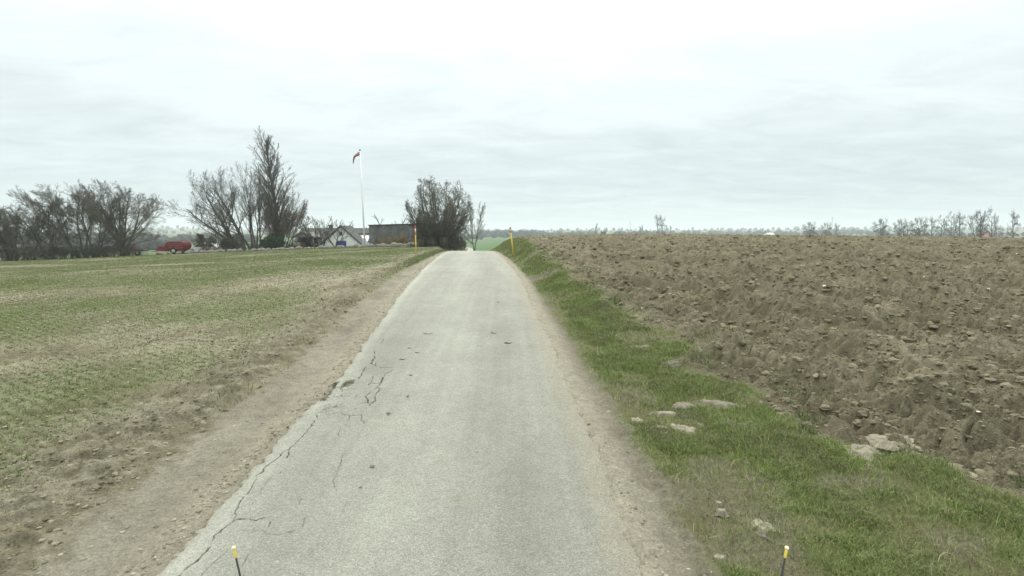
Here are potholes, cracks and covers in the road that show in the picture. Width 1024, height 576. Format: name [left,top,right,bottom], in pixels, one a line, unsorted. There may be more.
crack [178,339,393,576]
